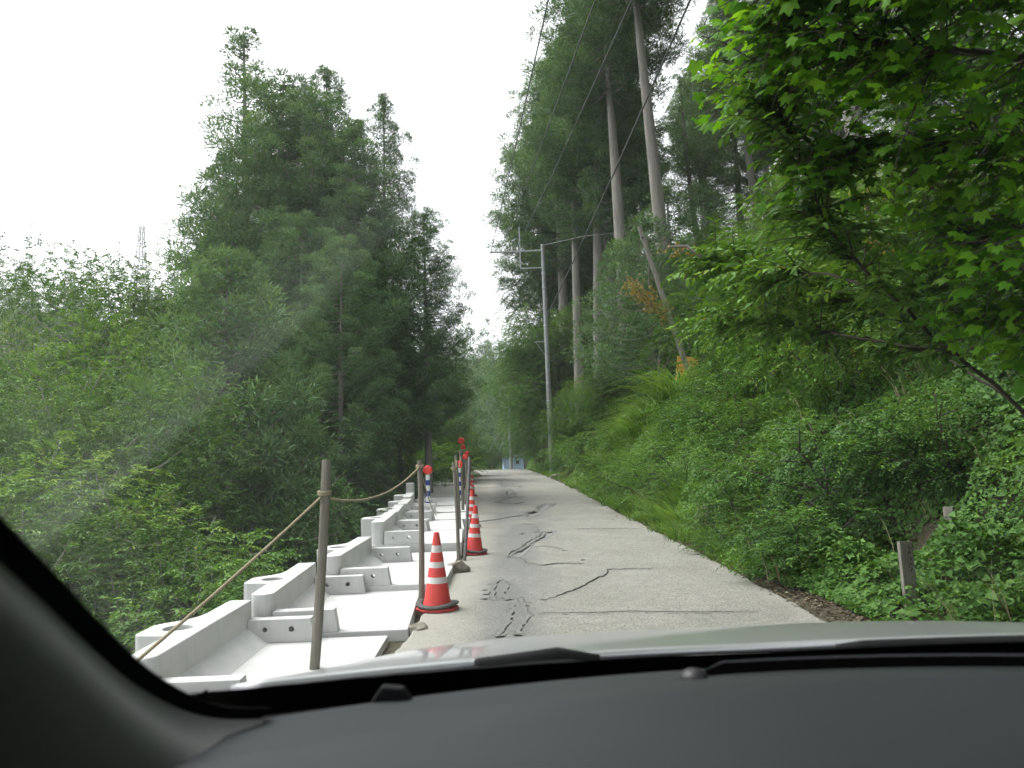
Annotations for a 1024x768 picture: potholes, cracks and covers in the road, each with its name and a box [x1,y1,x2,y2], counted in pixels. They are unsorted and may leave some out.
crack [475,479,759,637]
